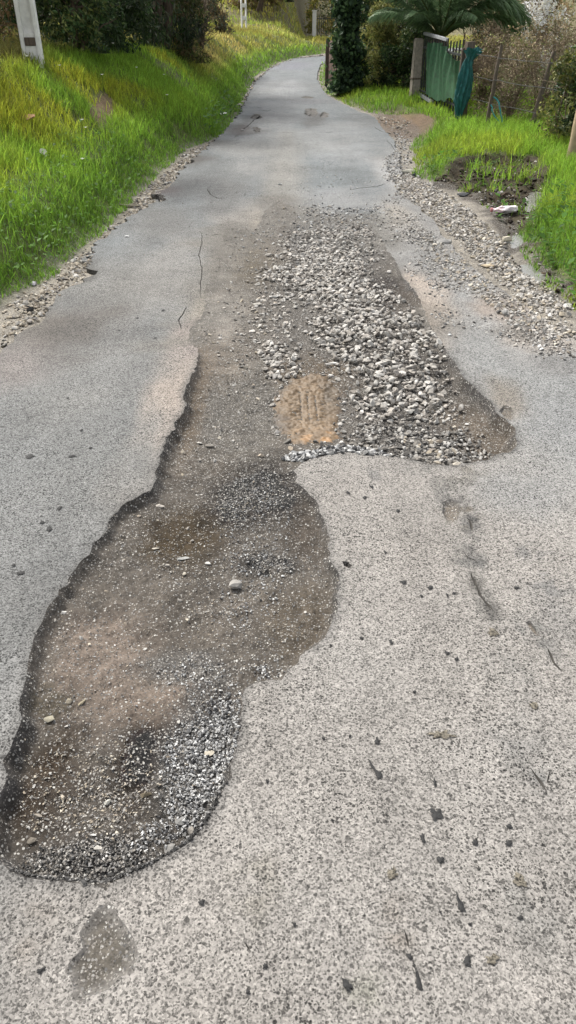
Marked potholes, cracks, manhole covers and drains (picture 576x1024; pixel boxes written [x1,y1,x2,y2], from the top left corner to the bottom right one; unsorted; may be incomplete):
crack [465,554,492,609]
pothole [159,199,517,481]
pothole [0,466,340,891]
crack [178,234,217,329]
